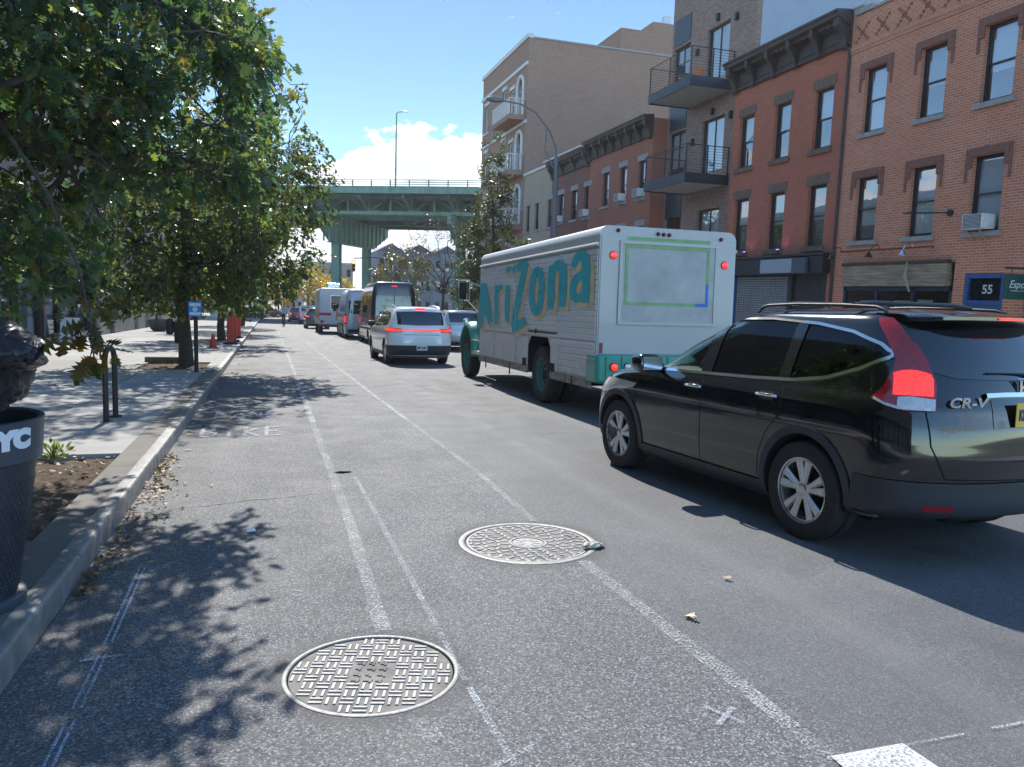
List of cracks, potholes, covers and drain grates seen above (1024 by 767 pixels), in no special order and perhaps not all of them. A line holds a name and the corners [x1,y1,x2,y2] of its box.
manhole cover [281,635,459,717]
manhole cover [459,523,597,565]
